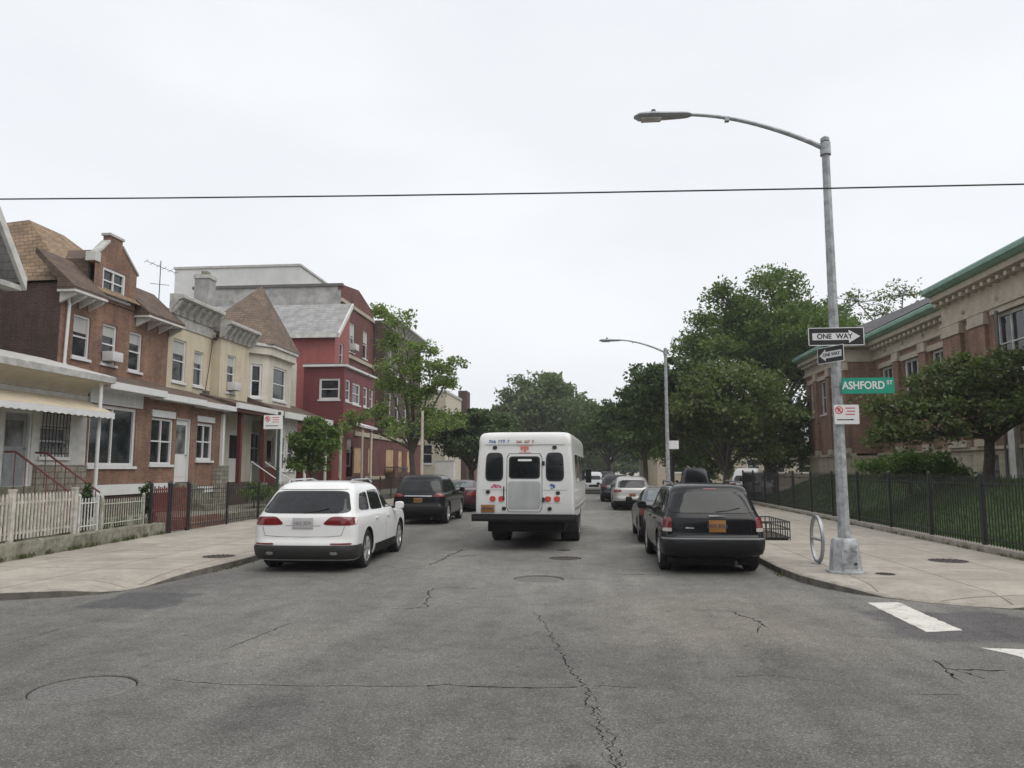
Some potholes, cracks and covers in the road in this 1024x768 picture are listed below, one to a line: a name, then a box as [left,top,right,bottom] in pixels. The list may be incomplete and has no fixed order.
manhole cover [513,575,564,583]
crack [172,614,631,768]
manhole cover [24,674,139,703]
crack [933,660,1003,695]
